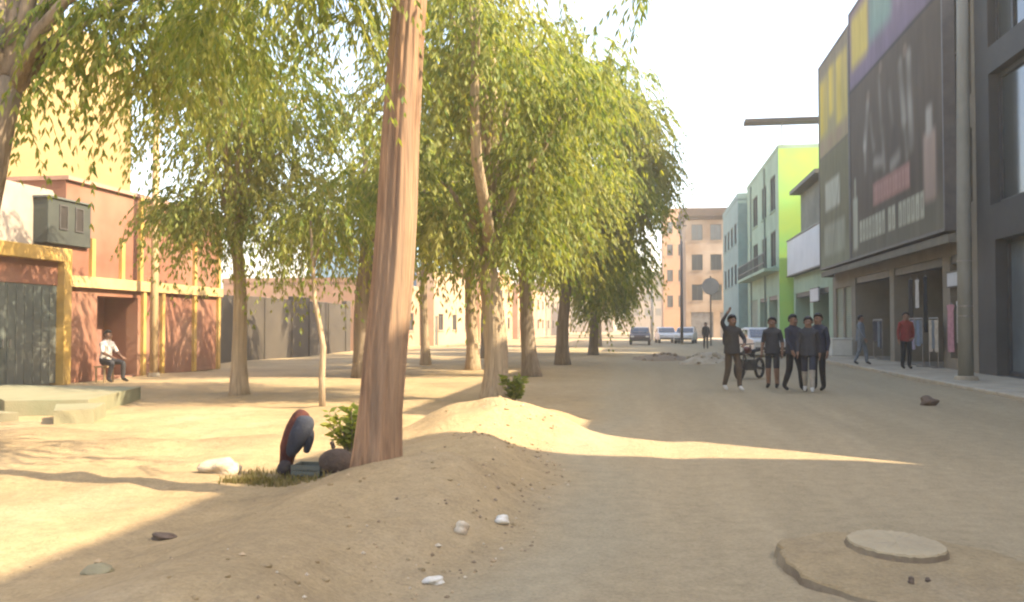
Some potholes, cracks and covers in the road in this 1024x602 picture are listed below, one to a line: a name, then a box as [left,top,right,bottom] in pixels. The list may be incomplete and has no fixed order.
manhole cover [774,529,1024,602]
